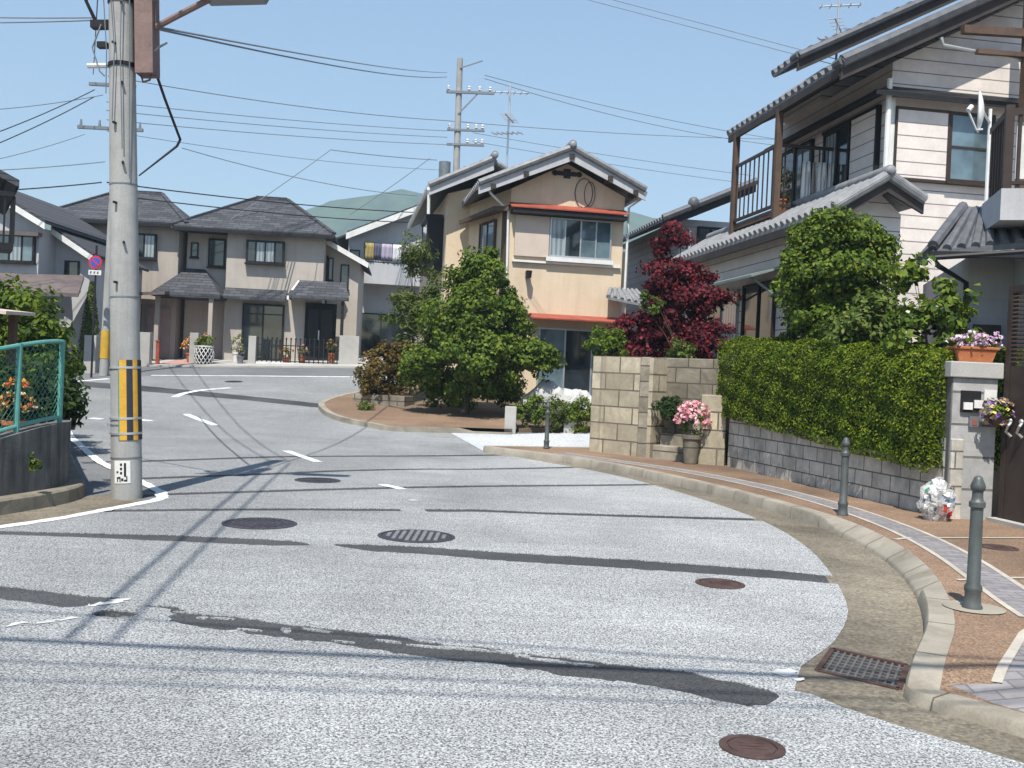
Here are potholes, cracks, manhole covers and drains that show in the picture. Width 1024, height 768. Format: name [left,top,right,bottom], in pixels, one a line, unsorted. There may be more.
manhole cover [719,734,786,760]
drain grate [814,647,910,690]
manhole cover [377,529,455,543]
manhole cover [221,517,297,530]
manhole cover [695,578,745,589]
